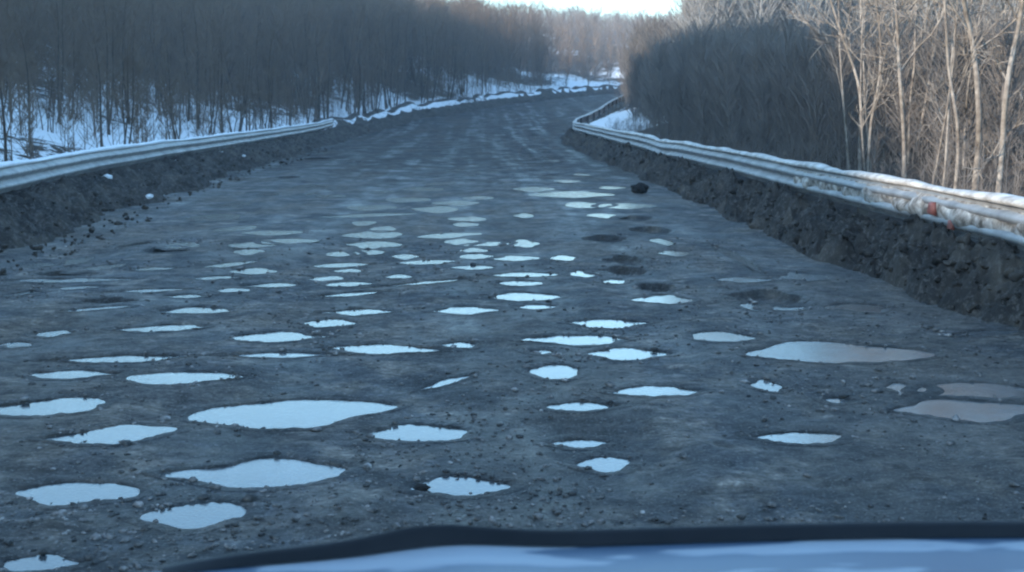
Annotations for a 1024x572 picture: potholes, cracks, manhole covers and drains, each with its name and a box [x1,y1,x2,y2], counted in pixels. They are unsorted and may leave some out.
pothole [0,474,161,511]
pothole [739,425,858,447]
pothole [171,394,414,432]
pothole [141,451,364,493]
pothole [508,331,640,348]
pothole [876,394,1024,425]
pothole [119,494,267,536]
pothole [351,418,484,445]
pothole [22,421,194,447]
